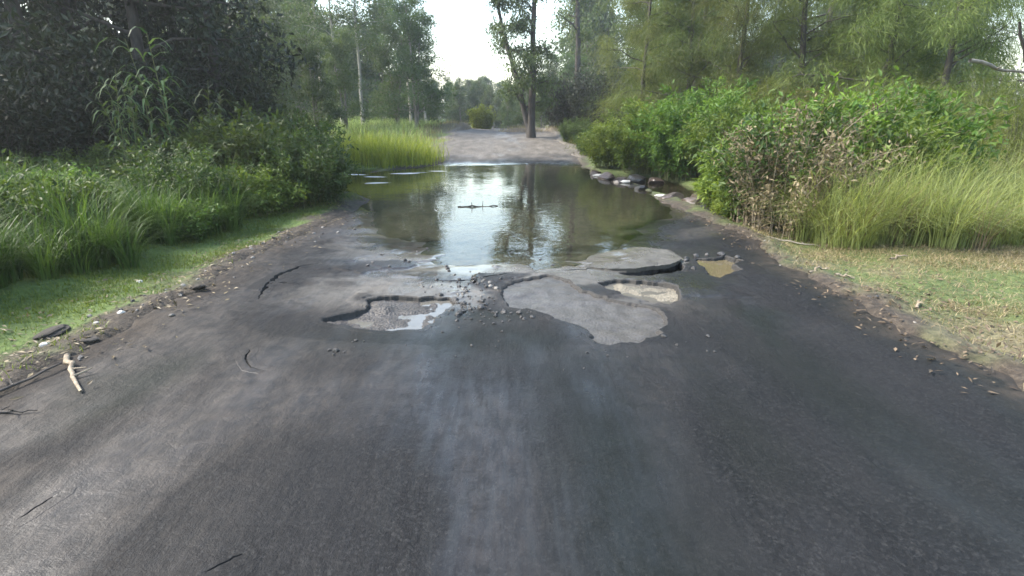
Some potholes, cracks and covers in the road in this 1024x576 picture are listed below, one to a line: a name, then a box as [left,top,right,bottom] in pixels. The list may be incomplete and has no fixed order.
pothole [312,293,461,334]
crack [0,487,77,528]
pothole [689,254,749,279]
crack [248,261,322,301]
crack [235,345,272,374]
crack [195,538,260,576]
